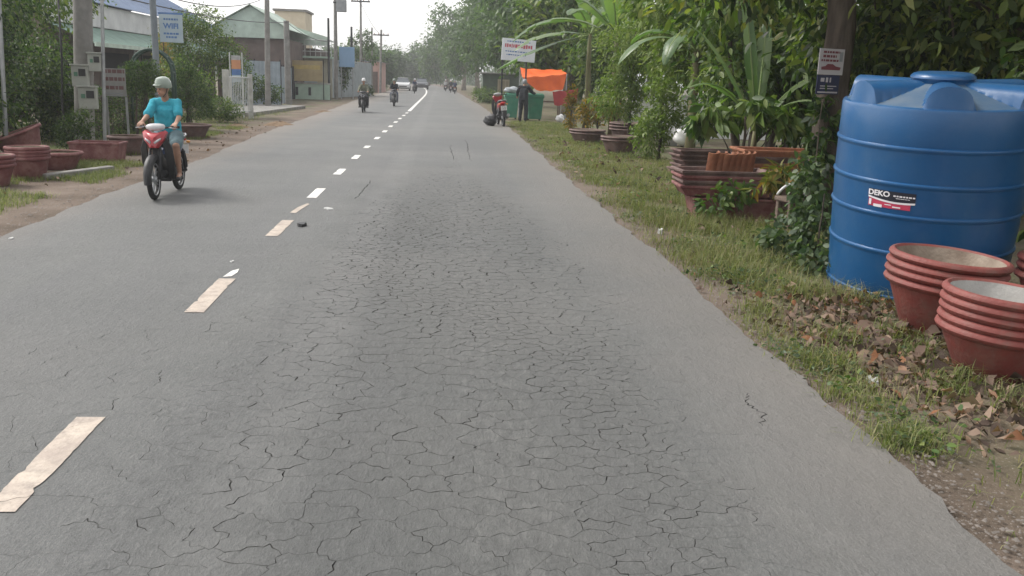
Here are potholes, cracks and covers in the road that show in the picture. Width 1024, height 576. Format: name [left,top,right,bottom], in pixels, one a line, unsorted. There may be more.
crack [0,167,823,576]
